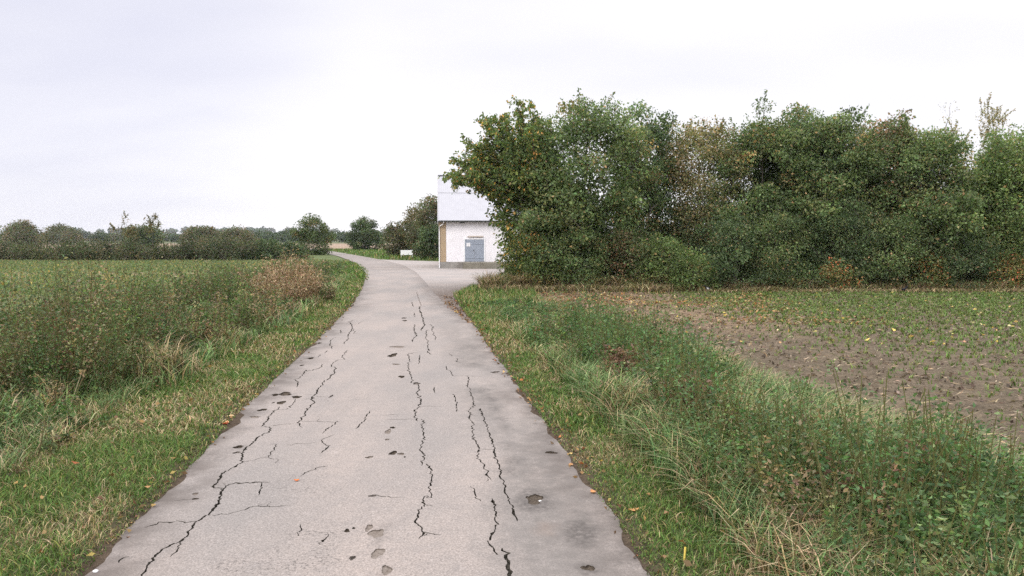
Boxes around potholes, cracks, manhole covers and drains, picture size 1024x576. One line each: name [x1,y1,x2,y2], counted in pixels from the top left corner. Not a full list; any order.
crack [295,320,361,476]
pothole [367,529,384,538]
crack [378,300,518,576]
pothole [526,494,543,505]
crack [118,399,296,576]
